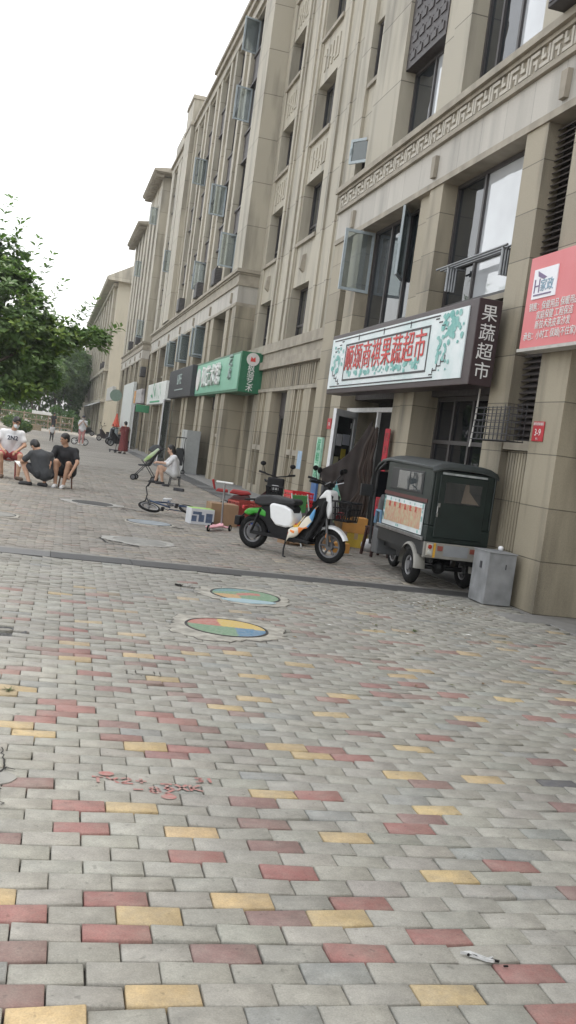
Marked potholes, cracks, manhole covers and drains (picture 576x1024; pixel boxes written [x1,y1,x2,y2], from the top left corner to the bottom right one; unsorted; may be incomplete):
manhole cover [124,519,175,527]
manhole cover [60,499,124,507]
manhole cover [193,586,292,608]
manhole cover [100,535,176,547]
manhole cover [163,614,288,643]
